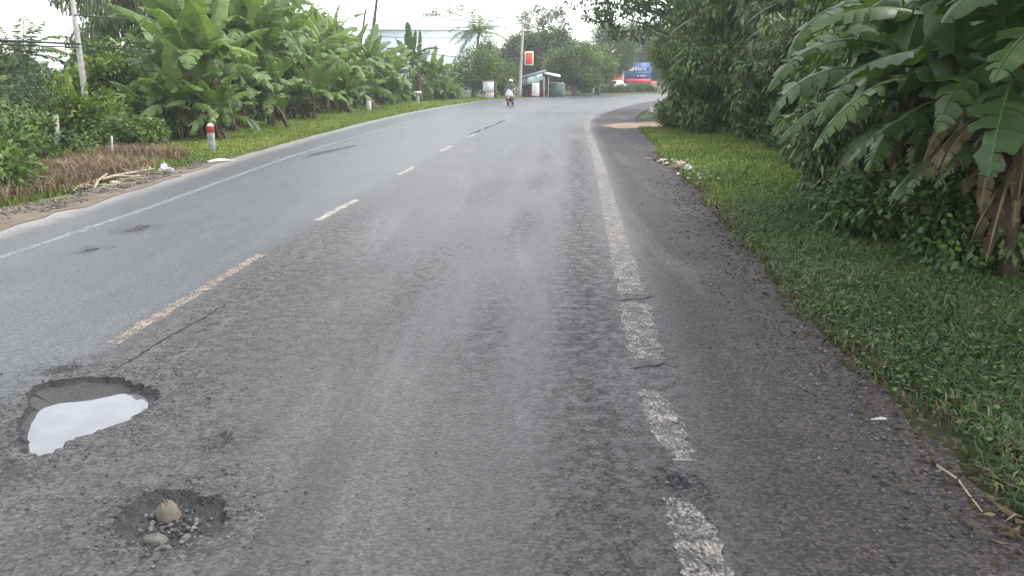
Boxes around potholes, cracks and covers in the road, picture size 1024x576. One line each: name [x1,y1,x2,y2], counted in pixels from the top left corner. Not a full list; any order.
pothole [15,376,162,456]
pothole [109,489,234,551]
pothole [662,471,695,492]
crack [115,304,226,370]
